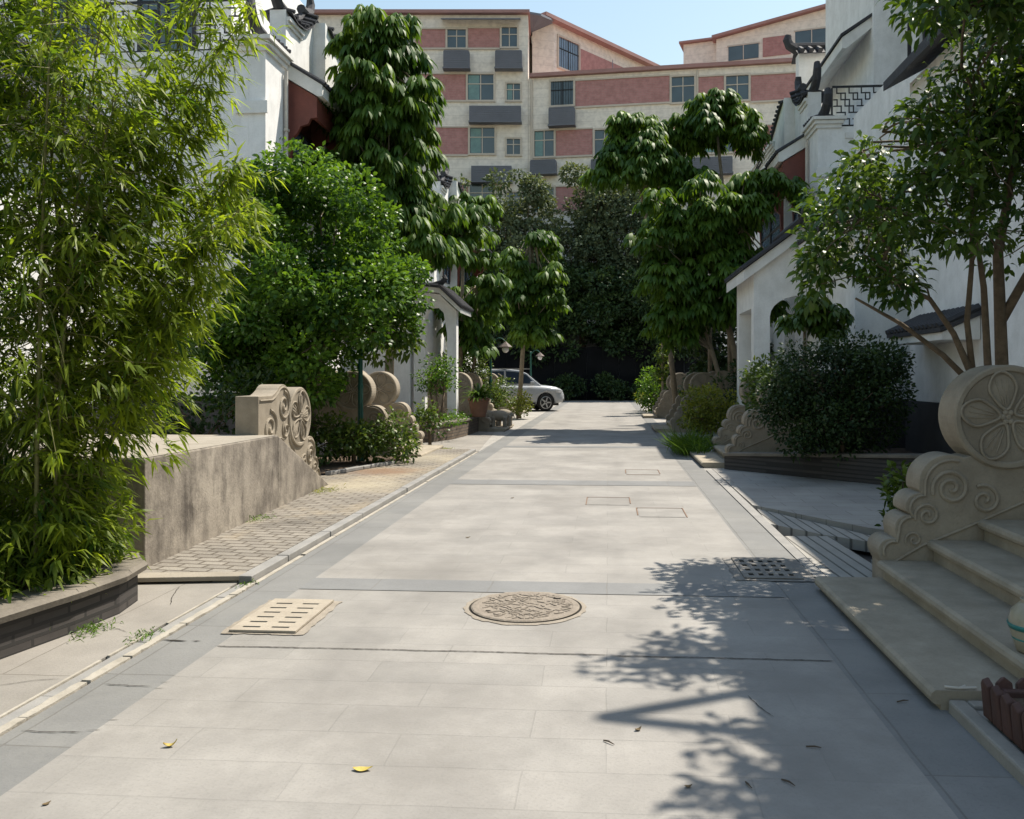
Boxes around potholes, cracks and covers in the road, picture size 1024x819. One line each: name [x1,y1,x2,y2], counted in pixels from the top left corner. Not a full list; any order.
manhole cover [463,591,587,625]
drain grate [221,598,342,635]
drain grate [722,557,815,582]
manhole cover [636,508,688,518]
manhole cover [586,497,631,505]
